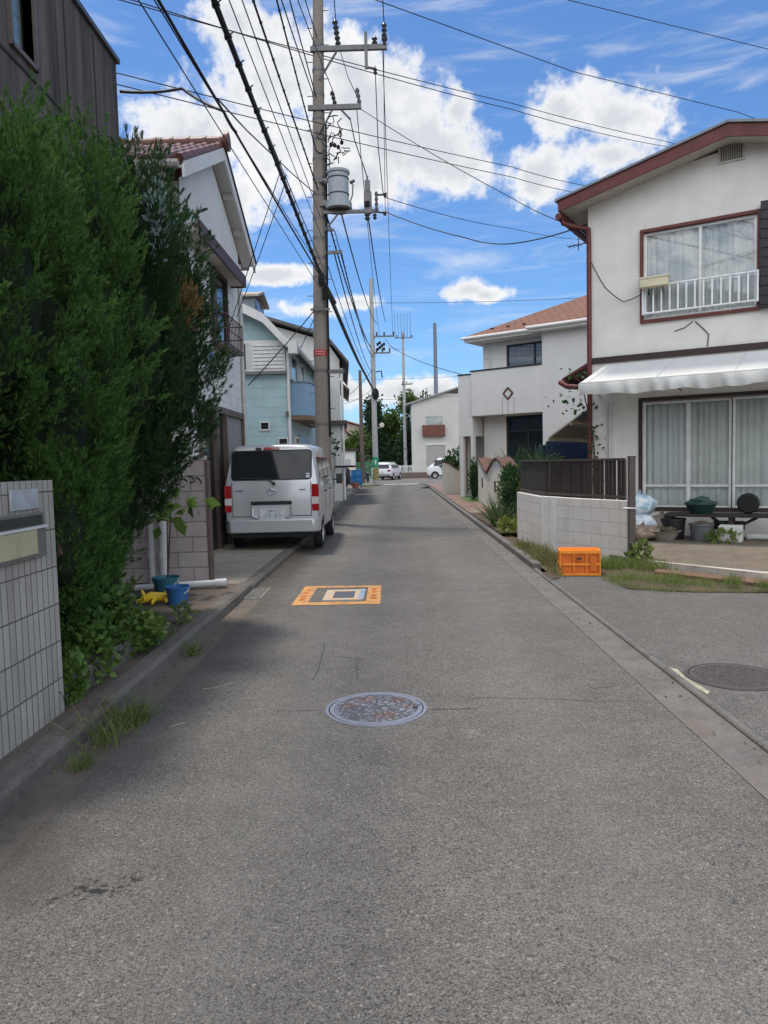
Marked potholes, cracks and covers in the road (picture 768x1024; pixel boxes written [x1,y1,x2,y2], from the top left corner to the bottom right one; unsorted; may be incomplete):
drain grate [243,589,270,600]
manhole cover [325,692,427,727]
manhole cover [684,663,768,691]
